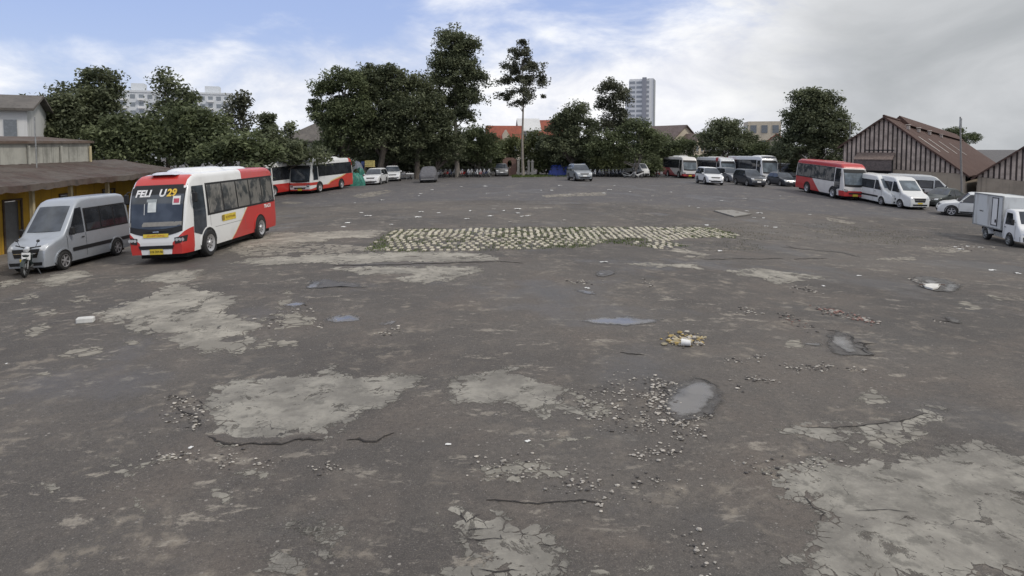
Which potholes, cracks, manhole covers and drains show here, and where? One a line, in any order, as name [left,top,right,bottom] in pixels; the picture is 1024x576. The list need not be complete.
pothole [307,279,360,289]
pothole [911,276,961,292]
crack [797,409,925,428]
crack [178,400,330,445]
crack [460,491,602,540]
pothole [664,377,723,421]
crack [347,429,394,442]
pothole [827,330,874,355]
